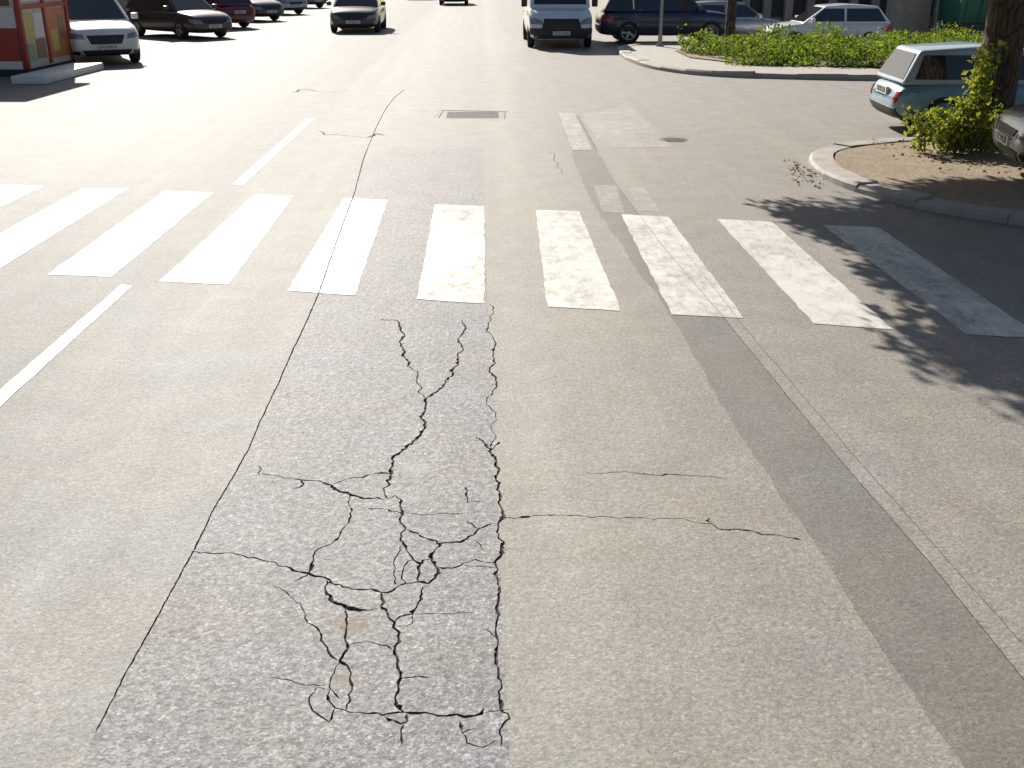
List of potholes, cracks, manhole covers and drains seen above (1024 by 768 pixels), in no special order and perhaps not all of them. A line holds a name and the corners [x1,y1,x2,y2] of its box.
crack [192,304,801,748]
manhole cover [435,110,509,120]
